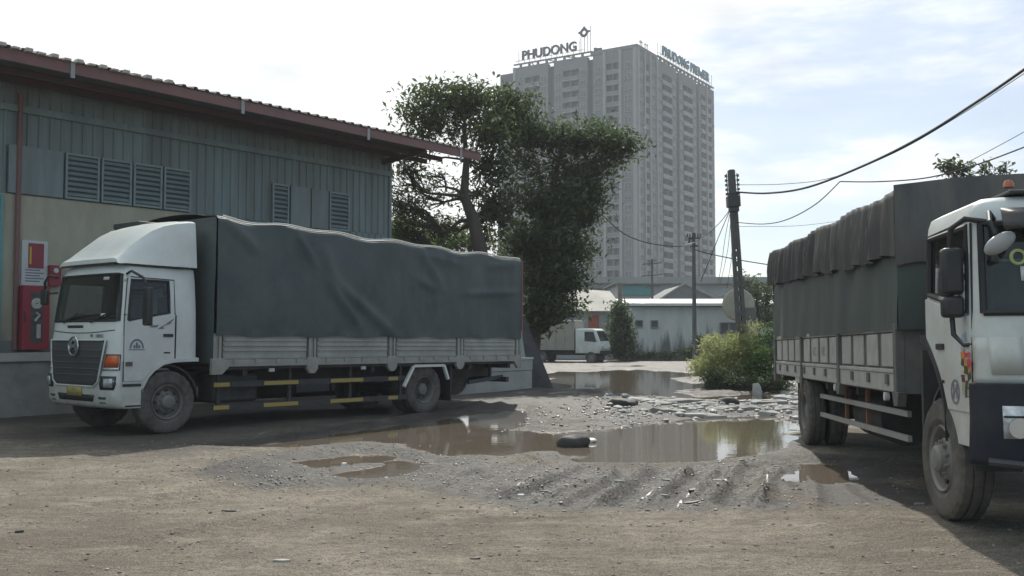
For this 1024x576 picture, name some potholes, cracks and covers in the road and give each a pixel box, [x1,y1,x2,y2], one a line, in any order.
pothole [325,460,437,479]
pothole [779,463,858,484]
pothole [410,415,801,463]
pothole [291,454,399,468]
pothole [547,369,709,398]
